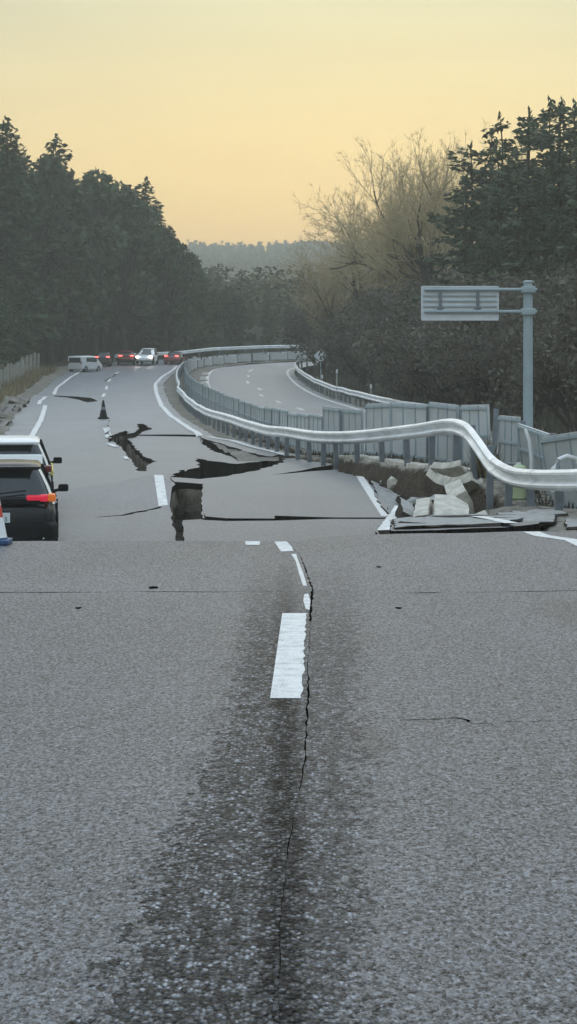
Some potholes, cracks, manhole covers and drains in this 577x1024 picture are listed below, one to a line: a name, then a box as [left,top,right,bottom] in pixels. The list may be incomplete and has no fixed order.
crack [278,548,314,1018]
crack [102,424,332,519]
crack [54,371,119,402]
crack [366,716,577,724]
